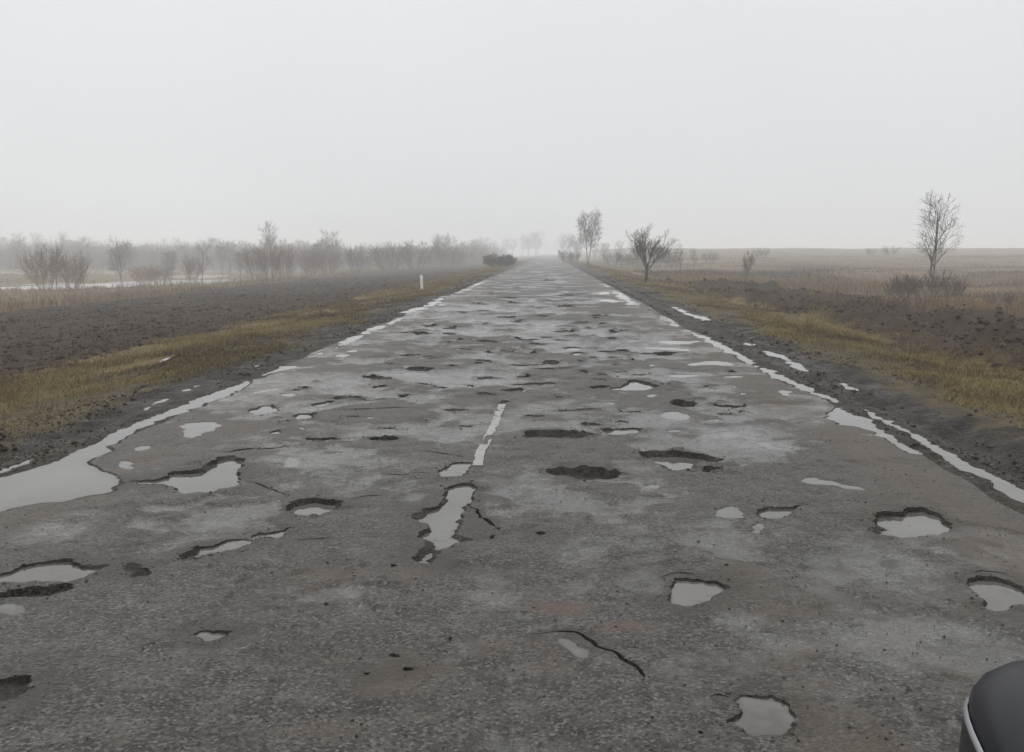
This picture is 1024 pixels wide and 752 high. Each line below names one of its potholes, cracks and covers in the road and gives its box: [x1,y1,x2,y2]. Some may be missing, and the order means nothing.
pothole [522,429,598,439]
pothole [411,482,478,564]
pothole [872,507,953,538]
pothole [726,694,797,737]
pothole [545,465,622,480]
crack [531,630,646,682]
pothole [437,462,472,477]
pothole [251,527,291,539]
pothole [178,539,253,561]
pothole [194,630,232,641]
